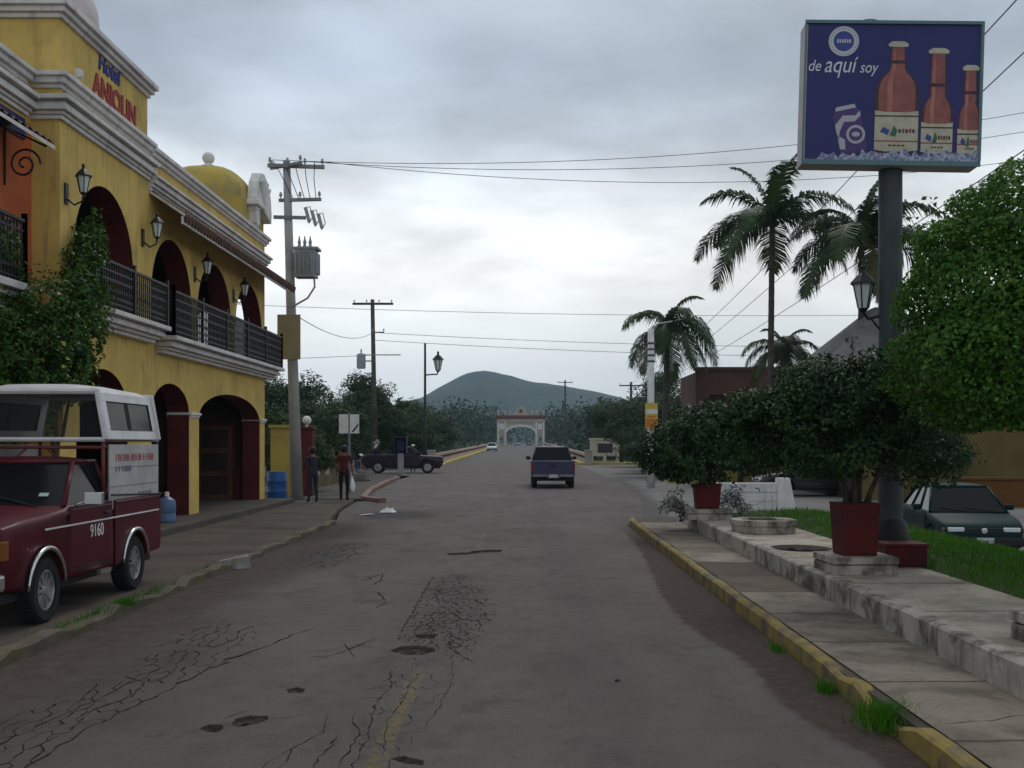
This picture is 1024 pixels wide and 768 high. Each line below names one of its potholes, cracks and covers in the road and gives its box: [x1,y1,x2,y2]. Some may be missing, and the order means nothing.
crack [262,655,463,768]
pothole [232,715,269,727]
crack [309,543,369,567]
pothole [198,724,223,732]
crack [0,620,332,768]
pothole [391,646,436,655]
pothole [392,756,424,765]
crack [361,574,496,663]
